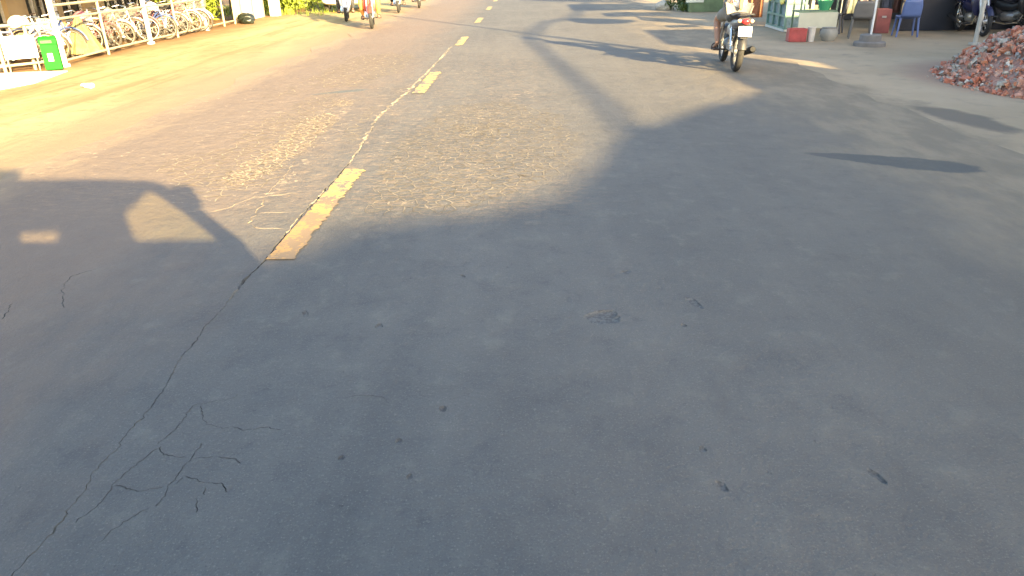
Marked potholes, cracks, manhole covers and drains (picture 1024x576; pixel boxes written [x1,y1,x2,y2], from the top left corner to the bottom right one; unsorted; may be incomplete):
pothole [867,468,888,485]
pothole [584,310,621,324]
crack [11,47,586,576]
